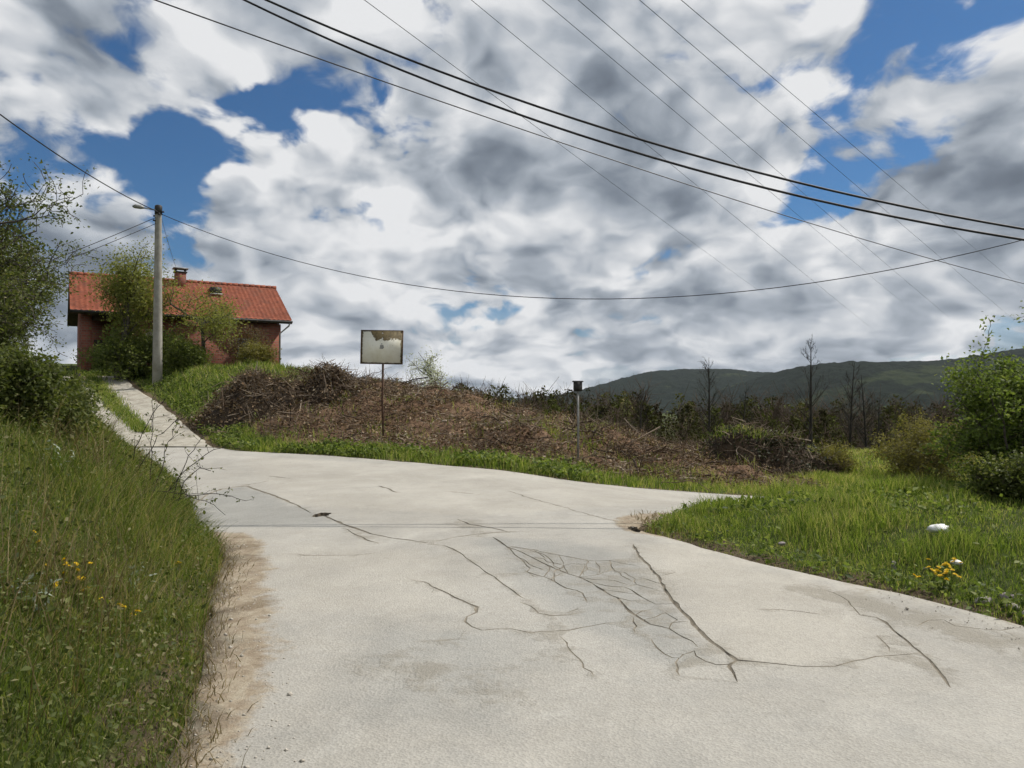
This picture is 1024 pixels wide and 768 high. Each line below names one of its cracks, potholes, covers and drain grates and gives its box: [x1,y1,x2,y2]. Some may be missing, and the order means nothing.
crack [196,469,426,556]
crack [416,519,1014,688]
